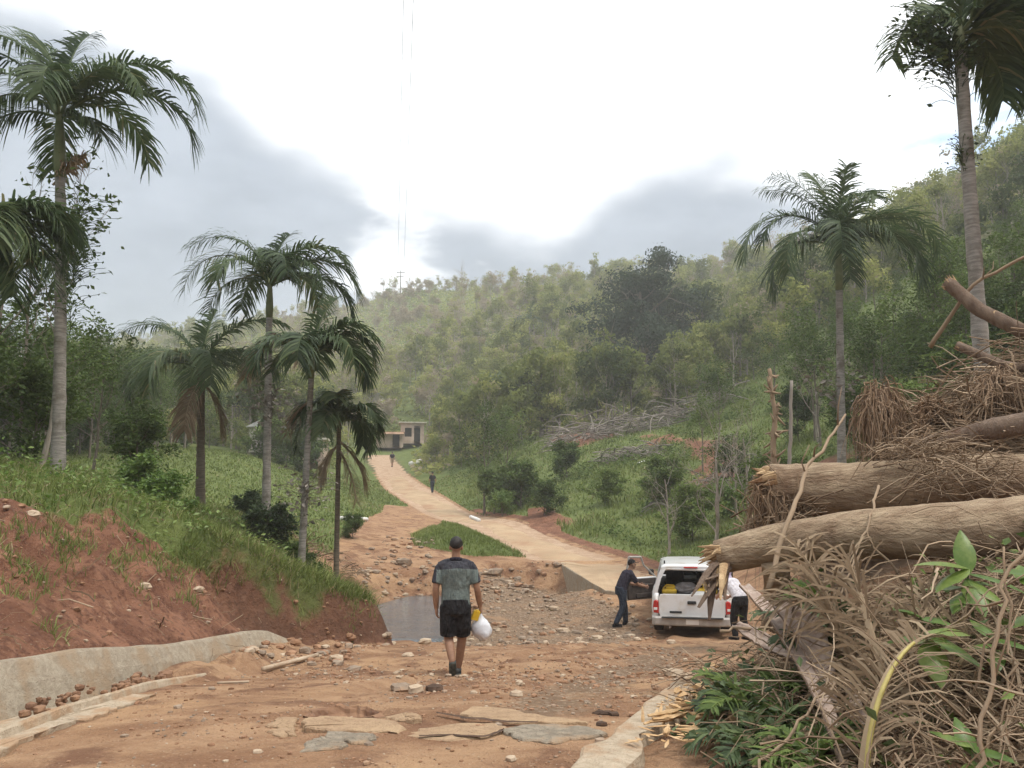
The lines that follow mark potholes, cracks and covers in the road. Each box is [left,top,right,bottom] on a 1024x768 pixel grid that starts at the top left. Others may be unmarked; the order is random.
crack [419,712,538,737]
